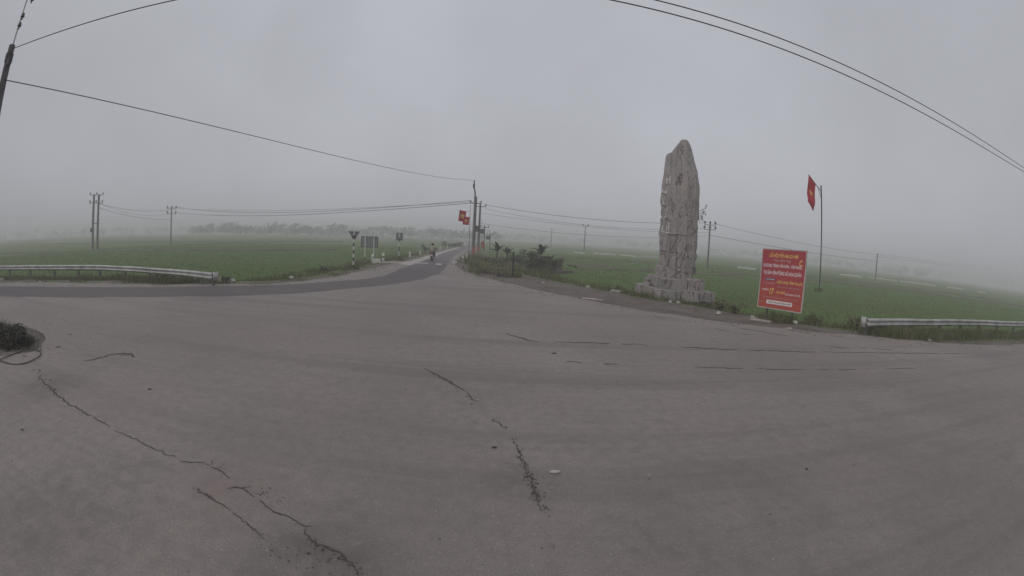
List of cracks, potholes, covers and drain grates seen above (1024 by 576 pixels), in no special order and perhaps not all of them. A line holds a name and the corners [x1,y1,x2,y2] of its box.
crack [509,327,966,370]
crack [424,368,555,548]
crack [35,369,363,575]
